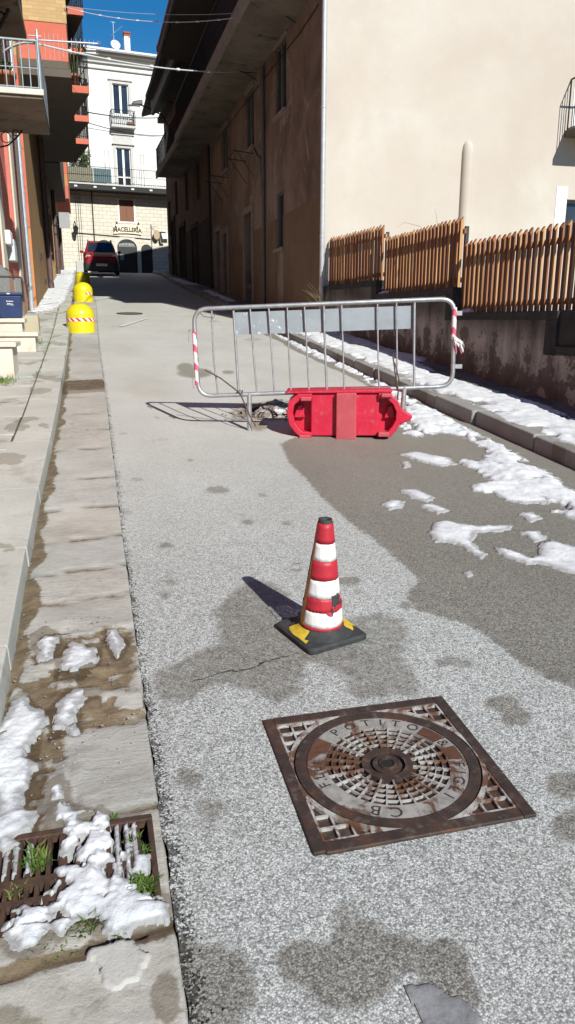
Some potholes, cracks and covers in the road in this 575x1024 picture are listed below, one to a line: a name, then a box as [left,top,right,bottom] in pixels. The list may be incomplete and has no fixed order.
crack [192,656,289,682]
drain grate [0,814,162,938]
pothole [229,400,288,420]
manhole cover [263,696,537,856]
